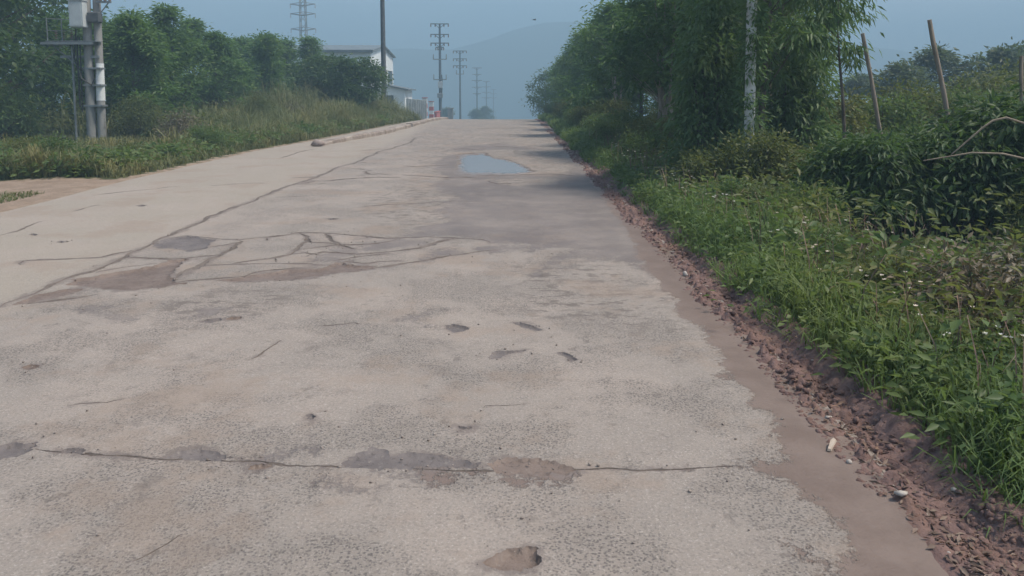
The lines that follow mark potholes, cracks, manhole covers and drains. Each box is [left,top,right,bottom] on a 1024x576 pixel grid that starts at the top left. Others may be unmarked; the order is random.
pothole [488,349,526,359]
crack [0,138,490,307]
pothole [483,546,542,572]
pothole [487,457,574,477]
pothole [445,324,470,333]
pothole [341,447,481,471]
pothole [0,442,38,460]
crack [37,449,741,472]
